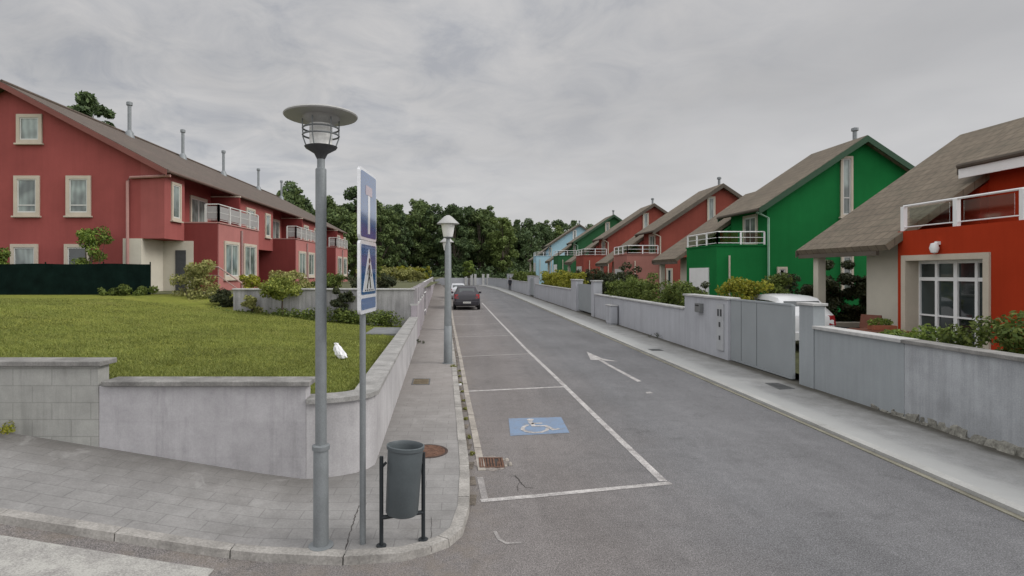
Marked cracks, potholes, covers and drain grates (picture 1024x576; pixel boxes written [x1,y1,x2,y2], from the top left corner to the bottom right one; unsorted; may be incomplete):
manhole cover [423,444,448,458]
drain grate [473,455,512,471]
